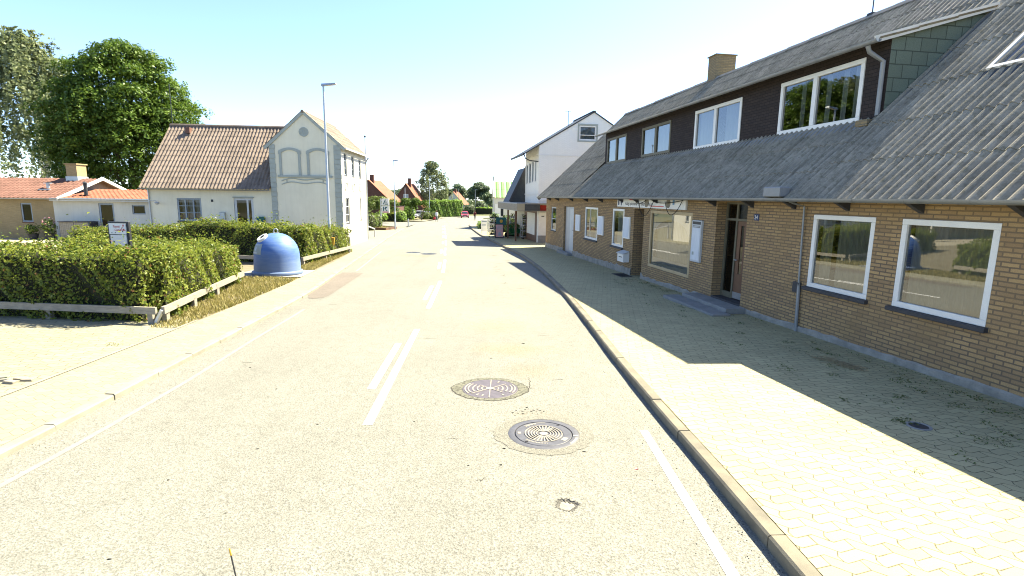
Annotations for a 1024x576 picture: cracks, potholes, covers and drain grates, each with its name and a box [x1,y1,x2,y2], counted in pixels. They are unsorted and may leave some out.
manhole cover [451,378,529,401]
utility cover [905,421,933,431]
manhole cover [493,415,594,455]
pothole [555,497,581,512]
